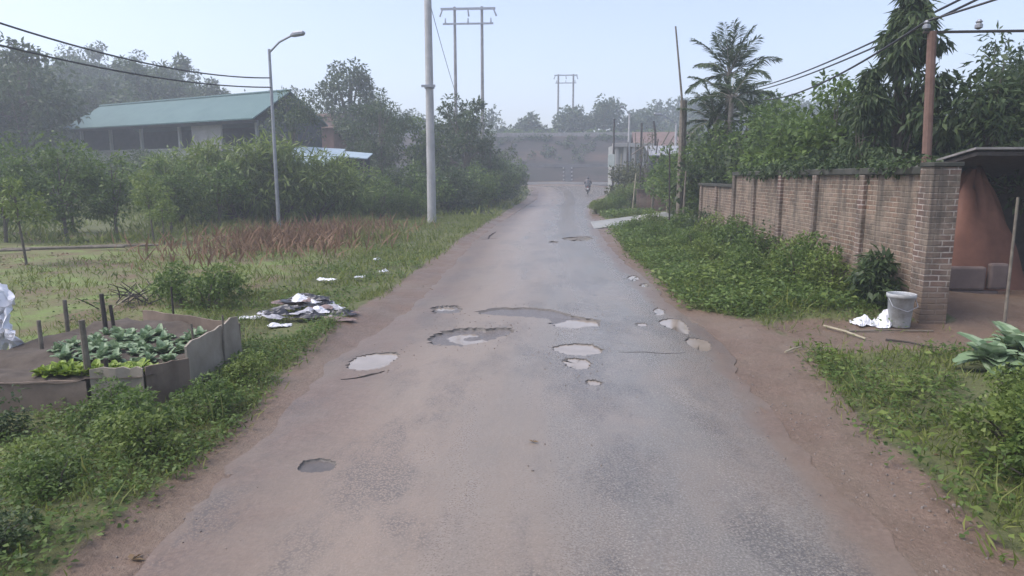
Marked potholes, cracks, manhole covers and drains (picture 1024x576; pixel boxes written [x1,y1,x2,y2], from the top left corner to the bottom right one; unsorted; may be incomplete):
pothole [427,327,515,347]
pothole [297,458,337,473]
pothole [658,318,690,334]
pothole [553,343,605,356]
pothole [561,357,593,370]
pothole [429,305,462,314]
pothole [475,307,601,329]
pothole [685,337,713,351]
pothole [346,352,400,371]
crack [341,371,384,380]
